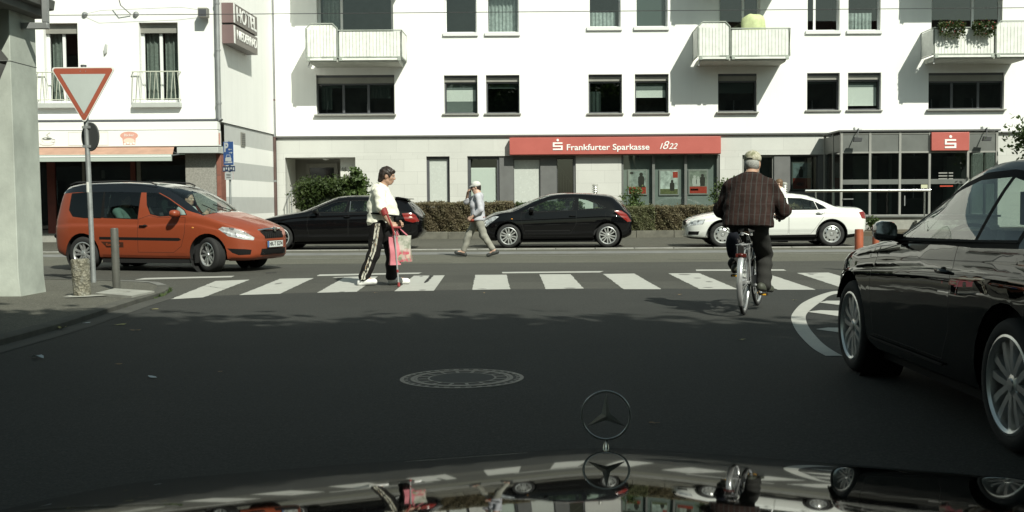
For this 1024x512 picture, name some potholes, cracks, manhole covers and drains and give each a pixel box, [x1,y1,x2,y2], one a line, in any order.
manhole cover [400,369,524,389]
